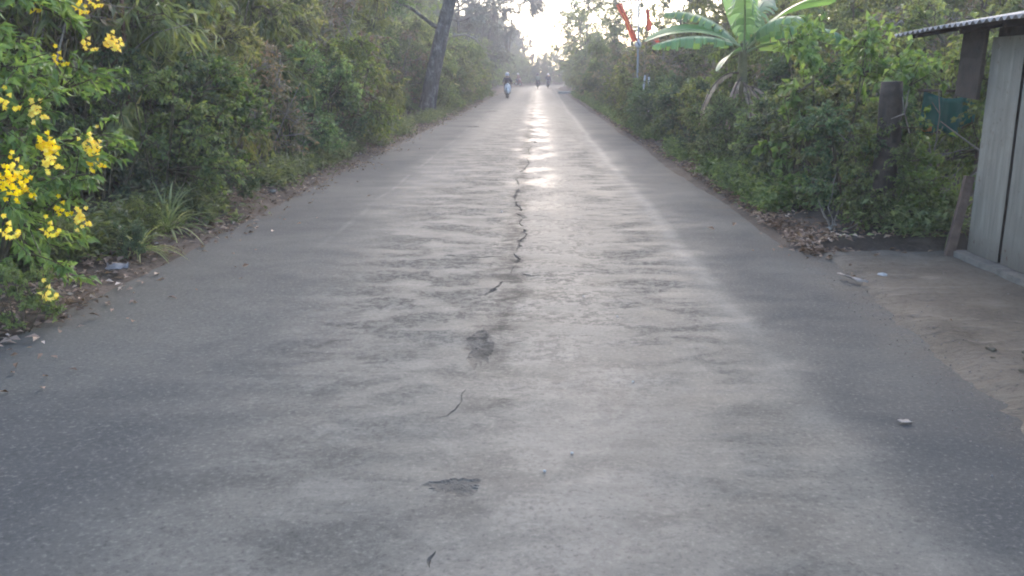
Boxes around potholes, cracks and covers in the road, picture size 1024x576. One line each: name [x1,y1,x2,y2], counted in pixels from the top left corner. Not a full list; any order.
crack [427,551,436,568]
pothole [420,478,482,498]
crack [446,146,551,296]
